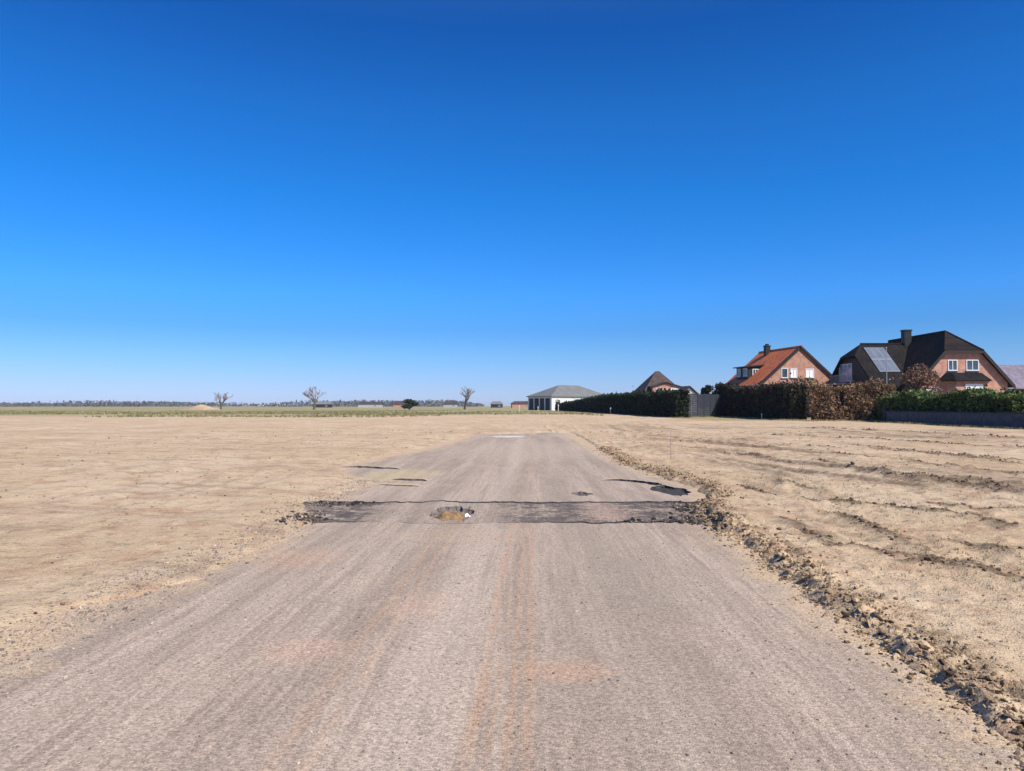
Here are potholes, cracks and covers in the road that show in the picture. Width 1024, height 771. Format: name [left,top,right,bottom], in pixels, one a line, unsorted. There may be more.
pothole [650,484,692,496]
pothole [429,506,475,520]
crack [303,465,700,504]
